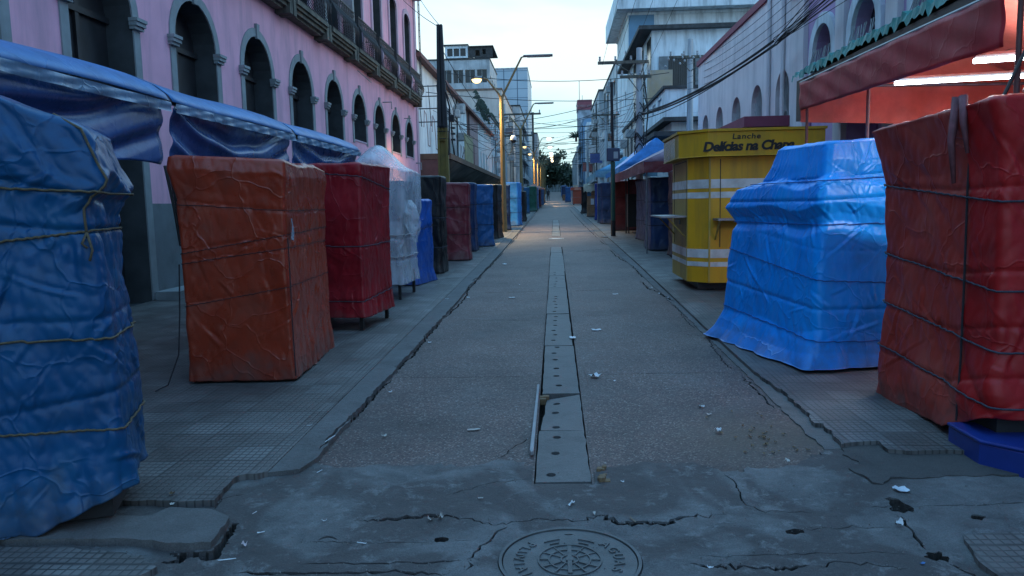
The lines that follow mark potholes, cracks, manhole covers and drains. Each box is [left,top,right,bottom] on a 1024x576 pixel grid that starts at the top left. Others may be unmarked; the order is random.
crack [709,341,775,409]
pothole [924,552,950,562]
manhole cover [498,527,642,576]
pothole [888,499,914,513]
crack [385,516,697,527]
